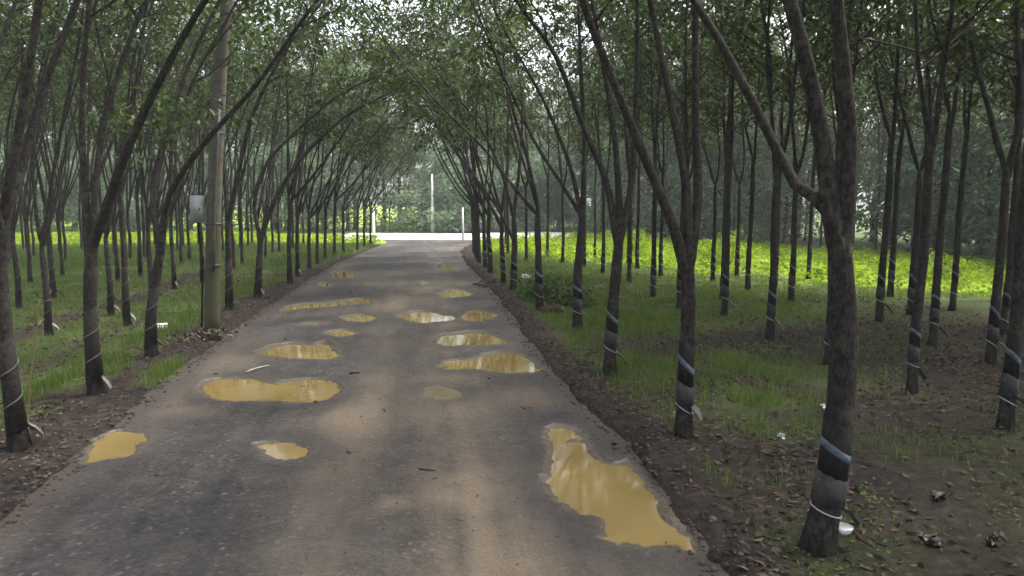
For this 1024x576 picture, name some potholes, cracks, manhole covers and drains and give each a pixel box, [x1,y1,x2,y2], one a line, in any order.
pothole [279,297,381,311]
pothole [78,428,151,464]
pothole [434,329,514,346]
pothole [338,314,380,322]
pothole [323,329,359,337]
pothole [536,423,701,554]
pothole [331,270,359,278]
pothole [456,310,501,322]
pothole [436,350,549,373]
pothole [436,288,475,298]
pothole [252,340,343,359]
pothole [395,310,460,323]
